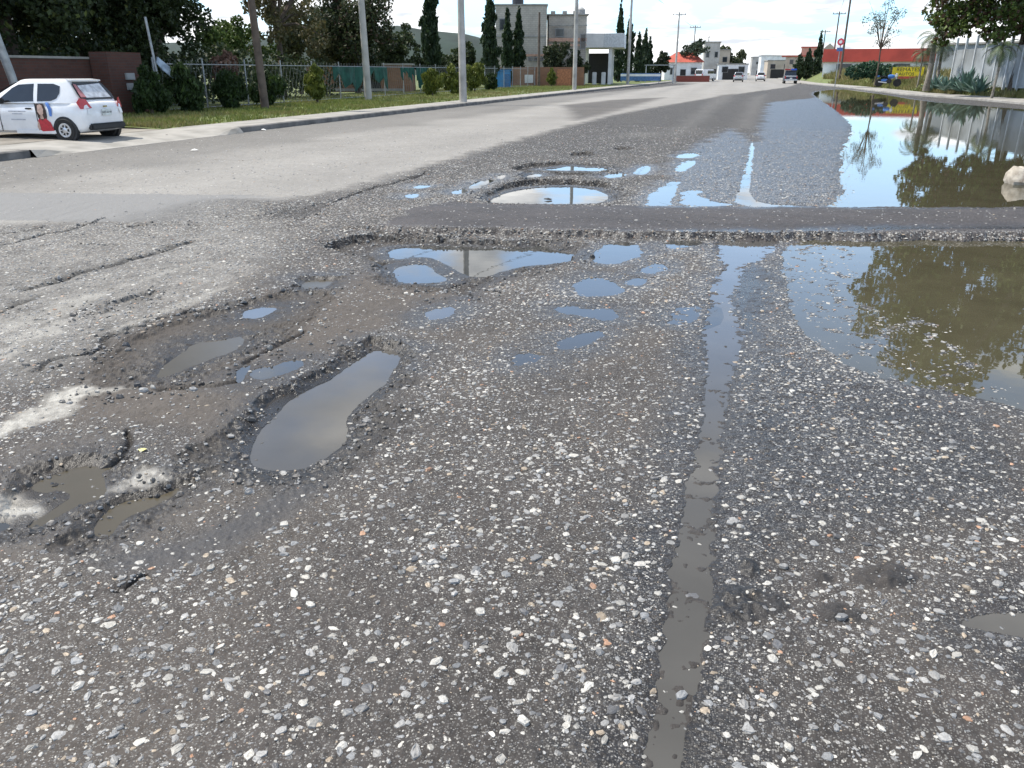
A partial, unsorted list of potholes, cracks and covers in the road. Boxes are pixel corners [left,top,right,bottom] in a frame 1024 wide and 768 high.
pothole [322,231,596,297]
pothole [0,451,229,558]
crack [0,217,309,393]
pothole [476,178,629,205]
pothole [72,275,350,400]
pothole [175,335,424,490]
